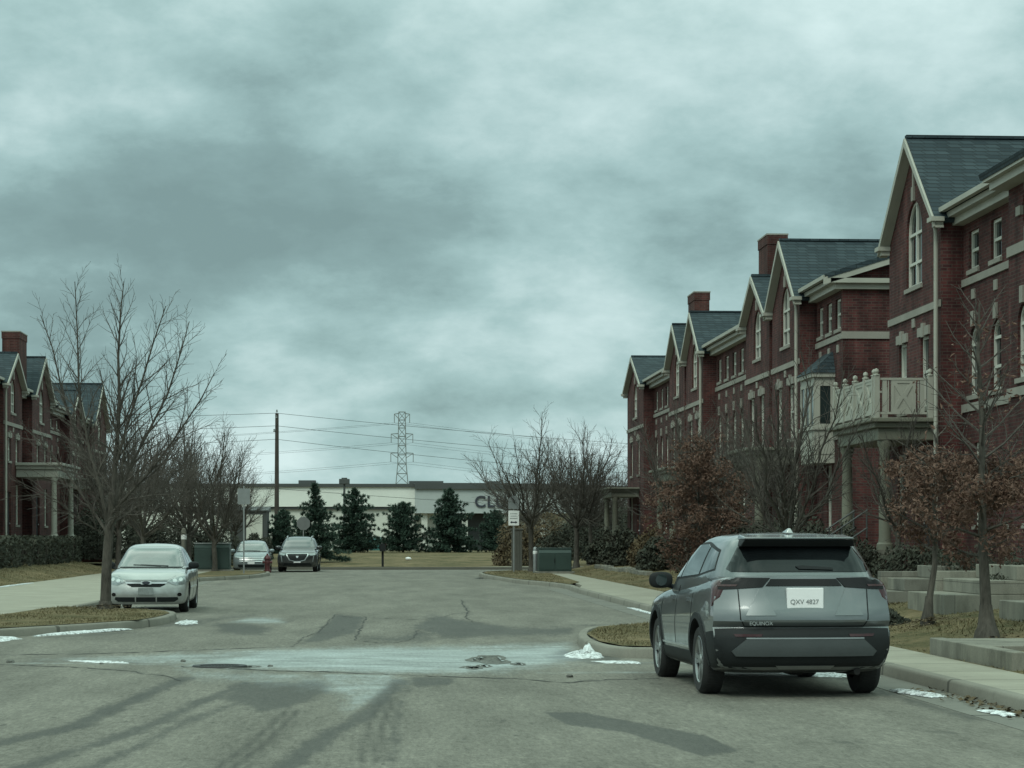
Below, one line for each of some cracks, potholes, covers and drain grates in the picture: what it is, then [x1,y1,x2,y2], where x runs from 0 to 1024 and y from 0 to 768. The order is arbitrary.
crack [0,600,473,681]
pothole [465,655,511,664]
